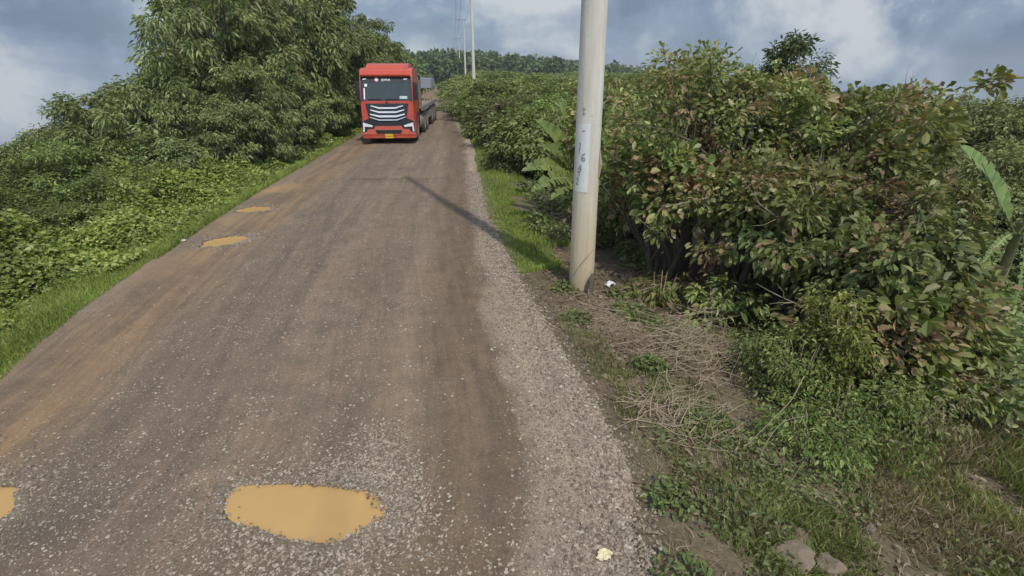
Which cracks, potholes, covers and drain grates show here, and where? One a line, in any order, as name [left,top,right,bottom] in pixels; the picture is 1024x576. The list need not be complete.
pothole [192,234,255,249]
pothole [0,477,36,526]
pothole [206,476,410,553]
pothole [229,205,274,214]
